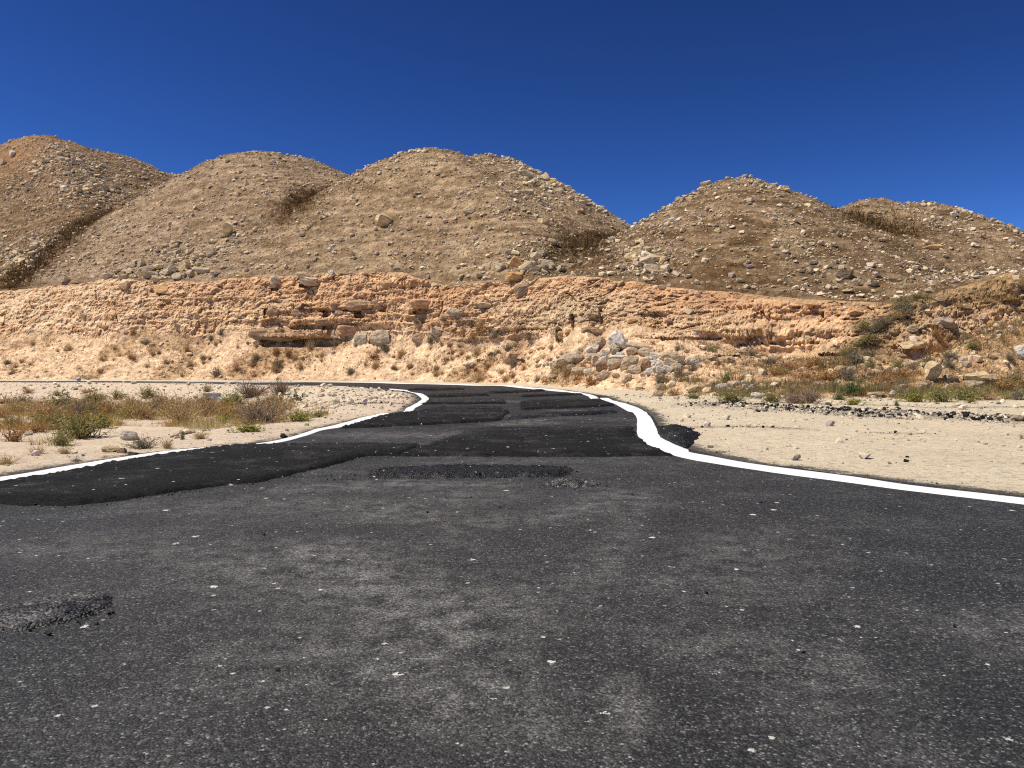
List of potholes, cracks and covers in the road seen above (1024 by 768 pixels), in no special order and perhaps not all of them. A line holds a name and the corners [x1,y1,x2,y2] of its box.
pothole [542,477,601,488]
pothole [0,591,113,632]
pothole [365,463,574,479]
